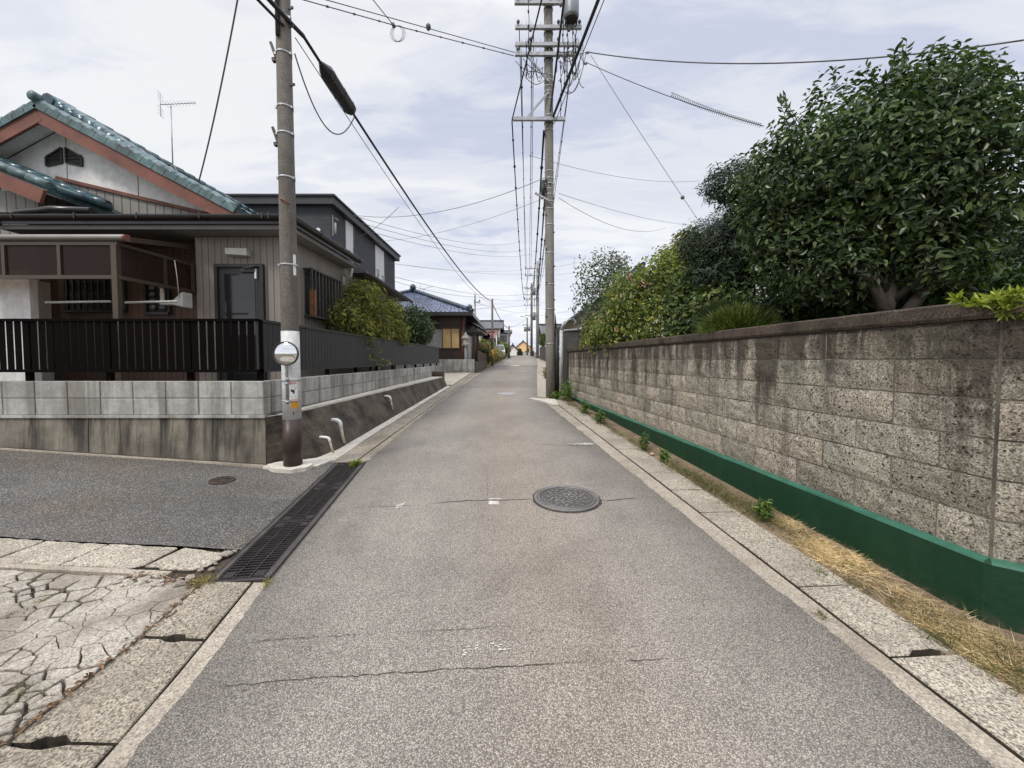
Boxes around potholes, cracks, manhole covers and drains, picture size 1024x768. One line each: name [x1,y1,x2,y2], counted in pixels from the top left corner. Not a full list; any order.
crack [248,619,643,643]
drain grate [207,461,366,584]
crack [342,472,664,508]
manhole cover [208,476,236,485]
crack [11,578,145,745]
manhole cover [533,486,602,513]
crack [219,657,690,687]
